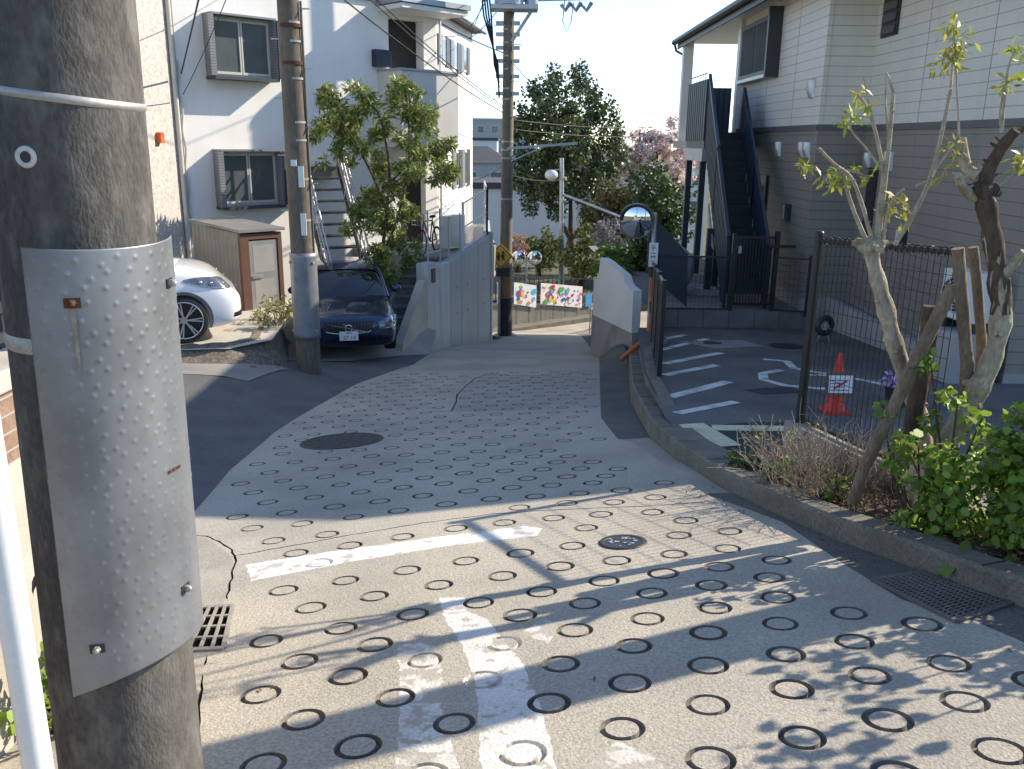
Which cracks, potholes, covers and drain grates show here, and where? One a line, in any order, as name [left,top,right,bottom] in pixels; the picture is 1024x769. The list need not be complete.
crack [198,657,207,724]
drain grate [192,604,235,652]
crack [197,535,237,599]
manhole cover [599,534,648,550]
crack [451,357,599,411]
manhole cover [299,432,384,450]
drain grate [870,570,1014,624]
